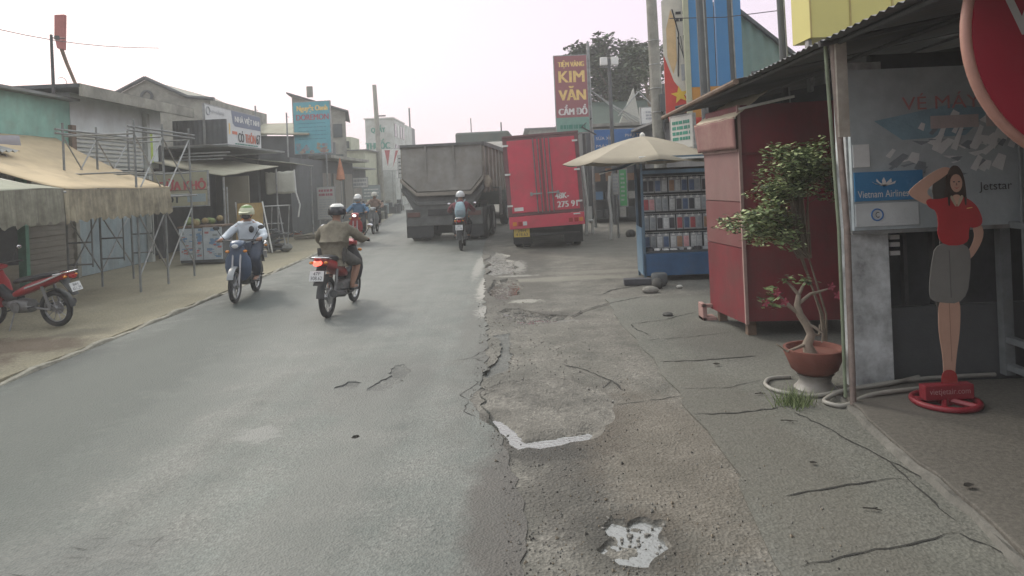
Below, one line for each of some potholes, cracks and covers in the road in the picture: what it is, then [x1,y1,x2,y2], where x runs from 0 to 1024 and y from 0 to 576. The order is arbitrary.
pothole [597,516,672,568]
pothole [469,378,616,450]
crack [563,364,676,405]
pothole [484,252,520,276]
crack [697,406,1003,567]
pothole [487,278,525,300]
